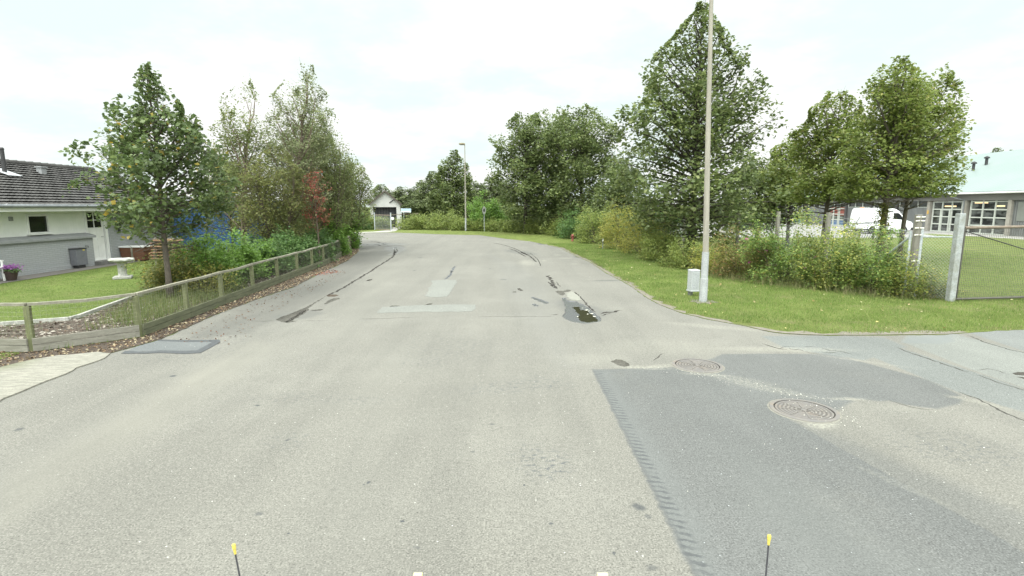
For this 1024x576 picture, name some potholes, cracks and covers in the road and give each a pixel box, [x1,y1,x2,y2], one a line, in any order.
manhole cover [767,399,843,424]
pothole [562,298,601,324]
manhole cover [670,358,725,374]
